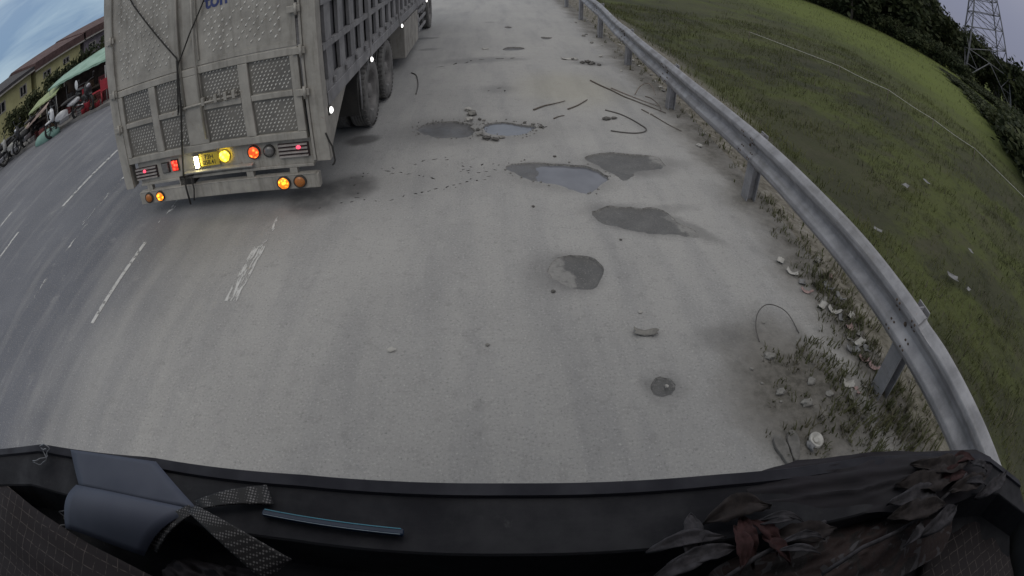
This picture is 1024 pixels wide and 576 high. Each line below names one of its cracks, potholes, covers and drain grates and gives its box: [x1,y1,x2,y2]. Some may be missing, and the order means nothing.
pothole [504,159,616,194]
pothole [547,255,604,290]
pothole [650,376,676,397]
pothole [477,119,544,138]
pothole [412,119,483,139]
